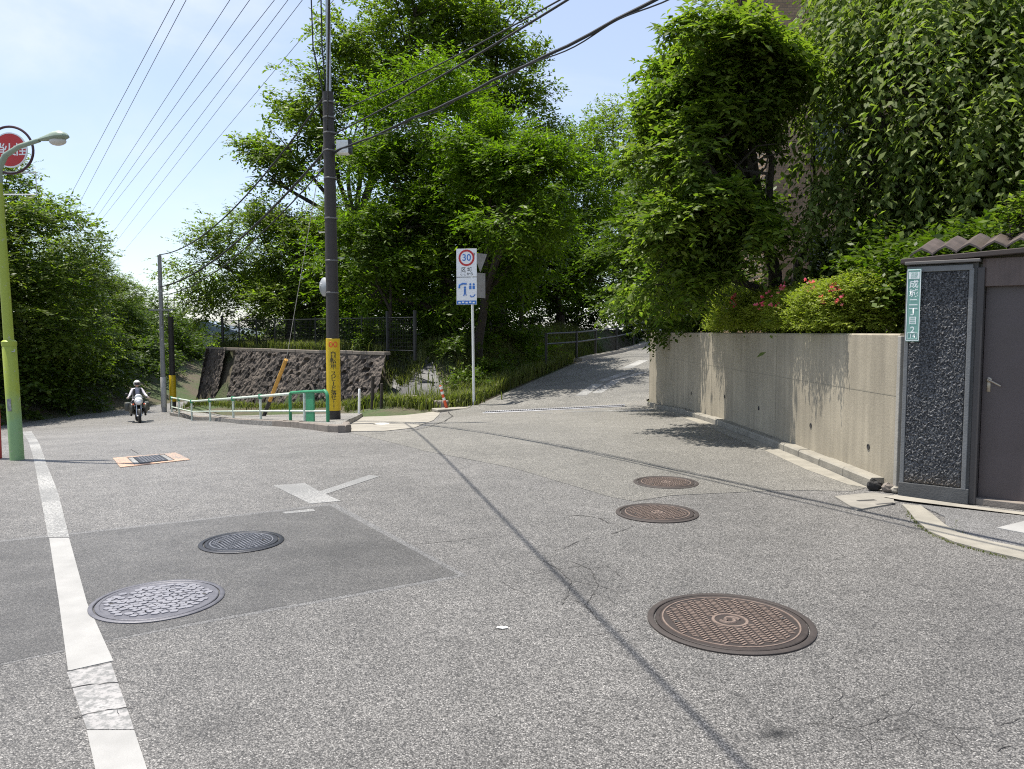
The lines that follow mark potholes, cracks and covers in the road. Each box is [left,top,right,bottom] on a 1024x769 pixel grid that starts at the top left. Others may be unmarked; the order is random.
manhole cover [87,579,225,624]
manhole cover [647,593,817,656]
crack [807,676,976,754]
manhole cover [198,531,284,554]
drain grate [484,404,625,413]
manhole cover [616,503,699,523]
manhole cover [633,476,699,489]
crack [535,538,642,636]
